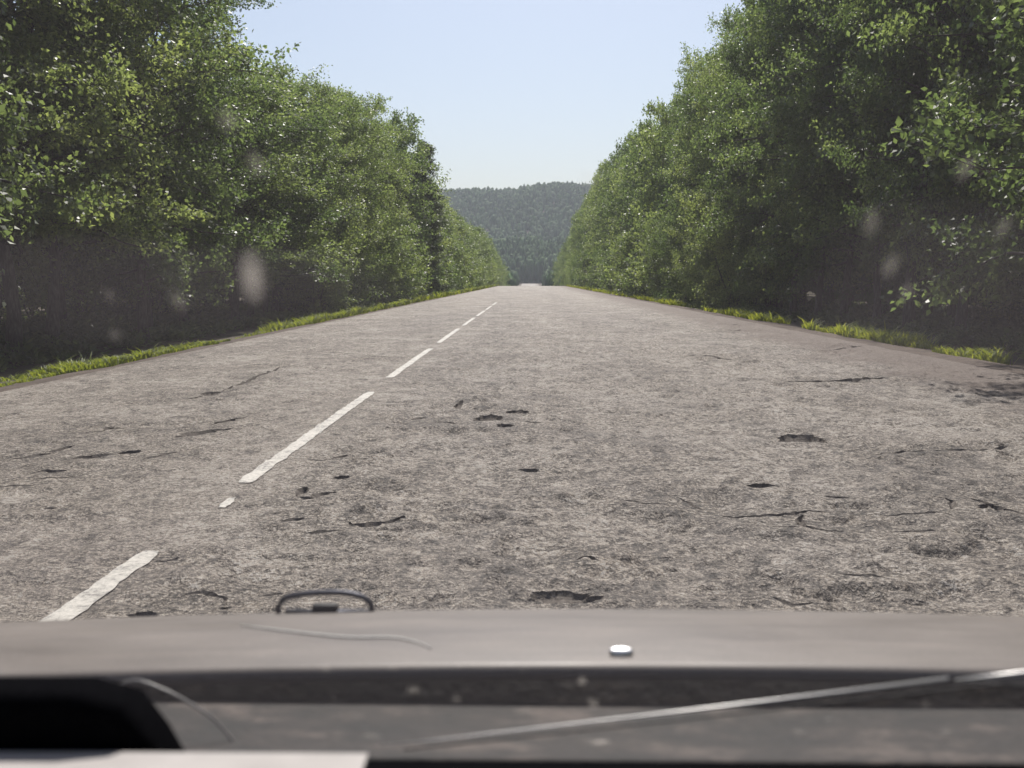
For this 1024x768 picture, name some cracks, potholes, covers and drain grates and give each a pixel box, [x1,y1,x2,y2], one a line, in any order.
crack [3,417,247,487]
crack [283,516,406,534]
pothole [527,590,605,604]
crack [722,496,850,532]
pothole [777,434,827,443]
crack [883,496,1023,532]
crack [189,366,285,399]
